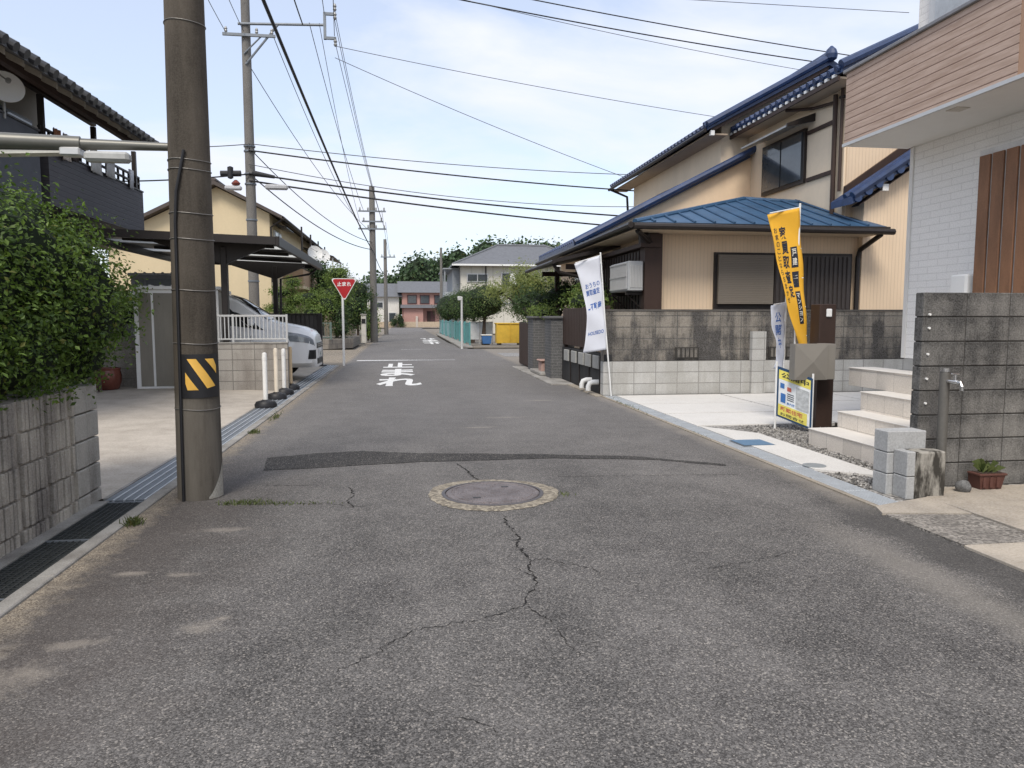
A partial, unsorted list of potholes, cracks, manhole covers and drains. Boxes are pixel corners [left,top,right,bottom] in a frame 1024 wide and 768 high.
manhole cover [428,479,559,511]
crack [343,515,598,668]
